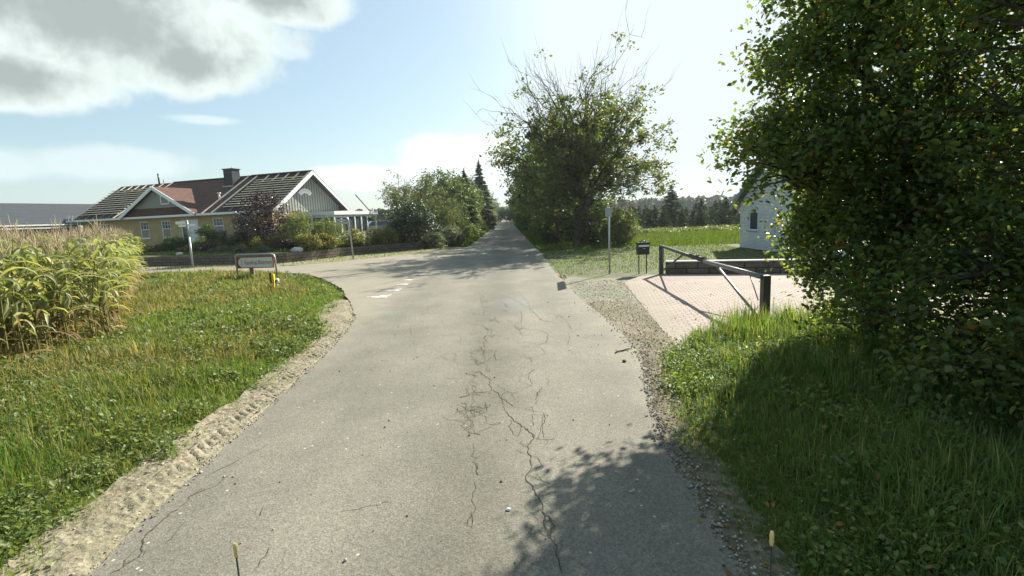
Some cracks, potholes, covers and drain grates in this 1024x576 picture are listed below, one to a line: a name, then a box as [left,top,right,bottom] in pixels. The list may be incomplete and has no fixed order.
crack [410,286,573,572]
crack [110,447,263,573]
